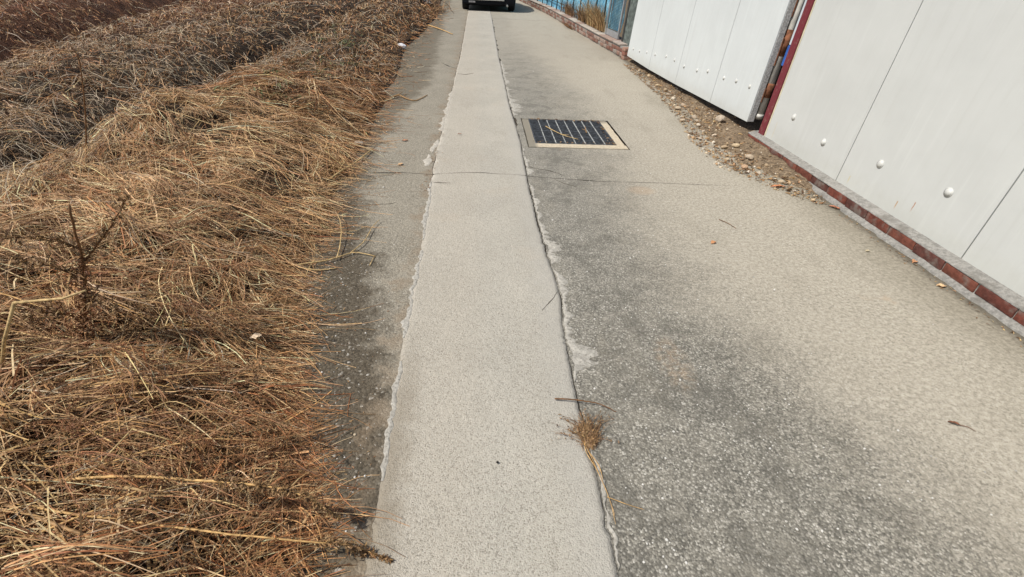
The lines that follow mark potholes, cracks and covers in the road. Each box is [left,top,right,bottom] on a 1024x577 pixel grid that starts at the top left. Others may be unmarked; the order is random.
drain grate [522,118,629,182]
